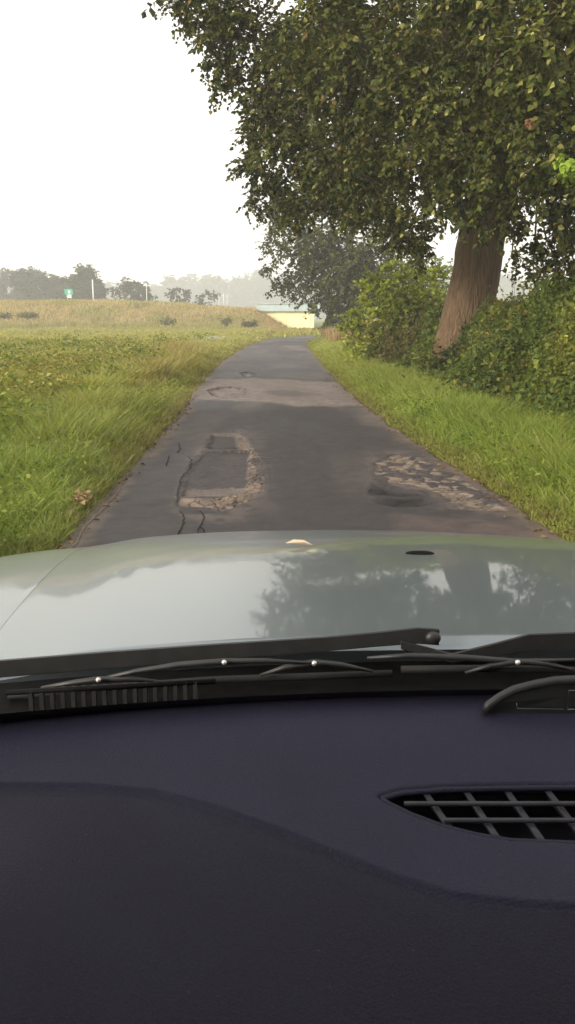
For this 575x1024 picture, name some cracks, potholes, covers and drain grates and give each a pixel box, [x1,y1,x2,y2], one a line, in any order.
crack [166,444,205,535]
pothole [204,386,251,399]
pothole [362,481,450,510]
